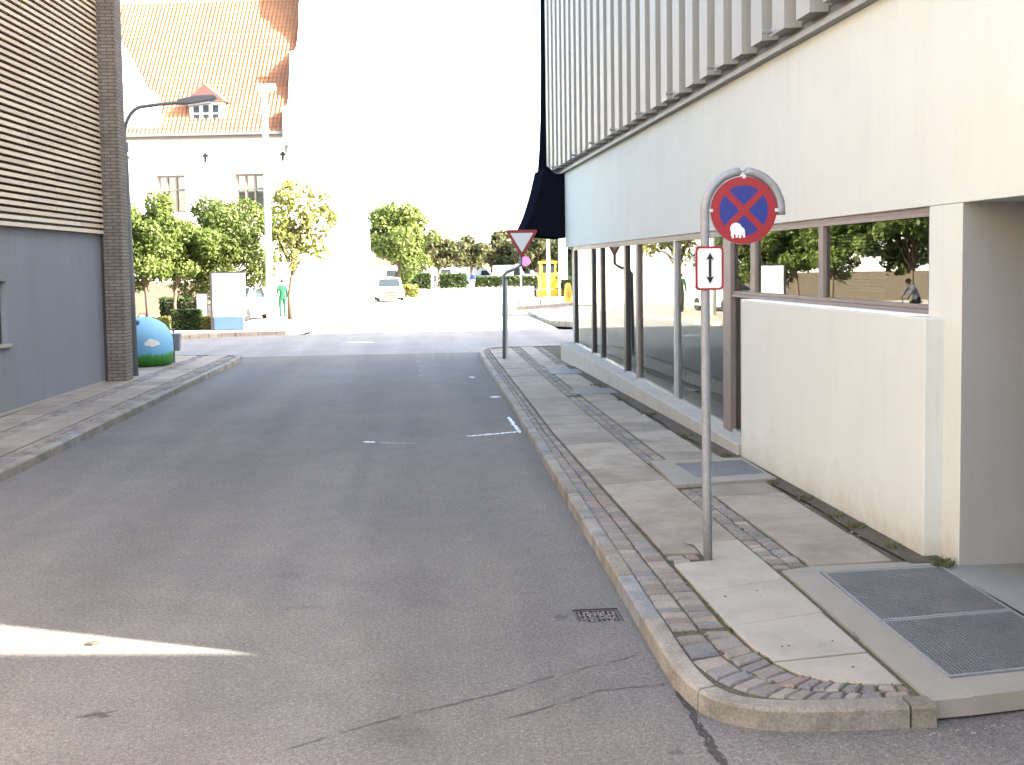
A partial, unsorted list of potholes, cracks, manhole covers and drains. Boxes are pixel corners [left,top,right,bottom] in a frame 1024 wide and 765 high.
drain grate [572,608,624,623]
utility cover [650,457,776,488]
drain grate [822,566,1012,621]
crack [284,651,652,750]
drain grate [880,610,1024,679]
